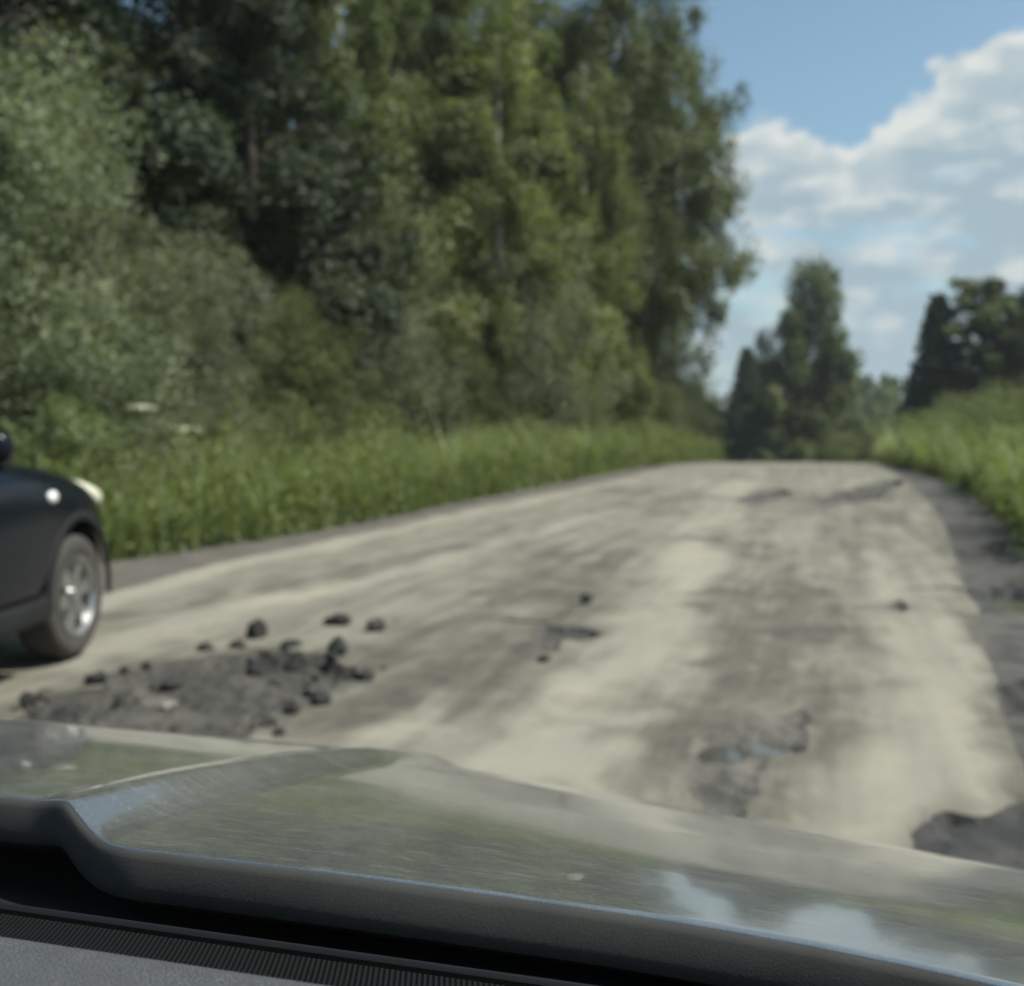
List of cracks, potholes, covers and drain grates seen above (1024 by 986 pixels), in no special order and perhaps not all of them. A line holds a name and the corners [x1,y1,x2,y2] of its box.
pothole [8,649,359,738]
pothole [530,625,605,653]
pothole [910,802,1024,869]
pothole [683,708,813,818]
